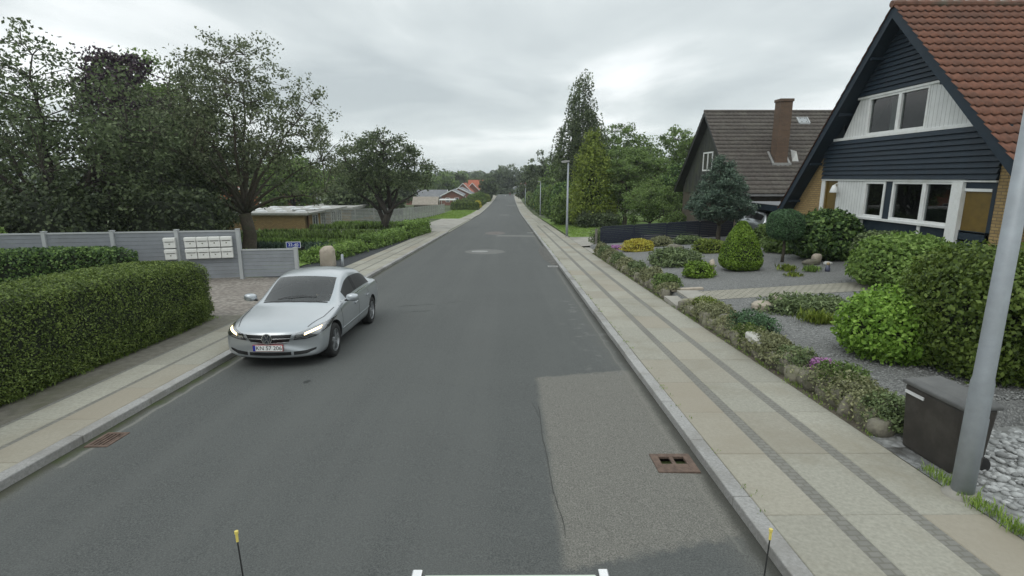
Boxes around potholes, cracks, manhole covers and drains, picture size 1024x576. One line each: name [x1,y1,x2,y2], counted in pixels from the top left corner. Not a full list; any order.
drain grate [84,432,130,448]
drain grate [649,454,701,474]
